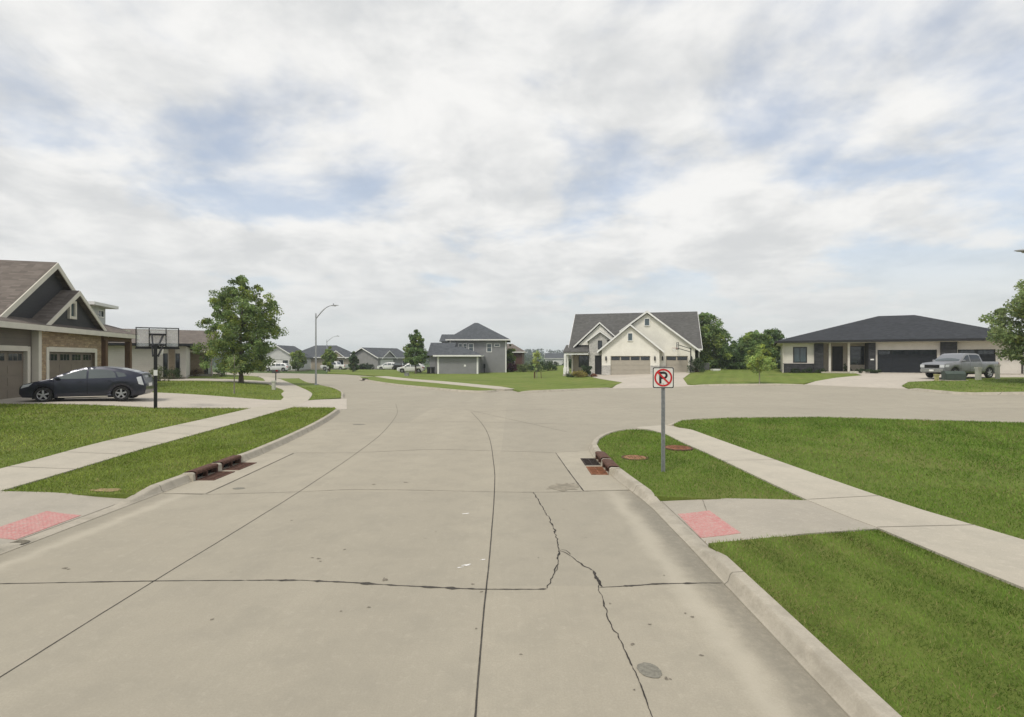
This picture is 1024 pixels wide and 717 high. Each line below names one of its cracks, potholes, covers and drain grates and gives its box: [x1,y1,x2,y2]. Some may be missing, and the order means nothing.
drain grate [167,453,292,494]
crack [535,495,653,717]
drain grate [555,451,629,491]
